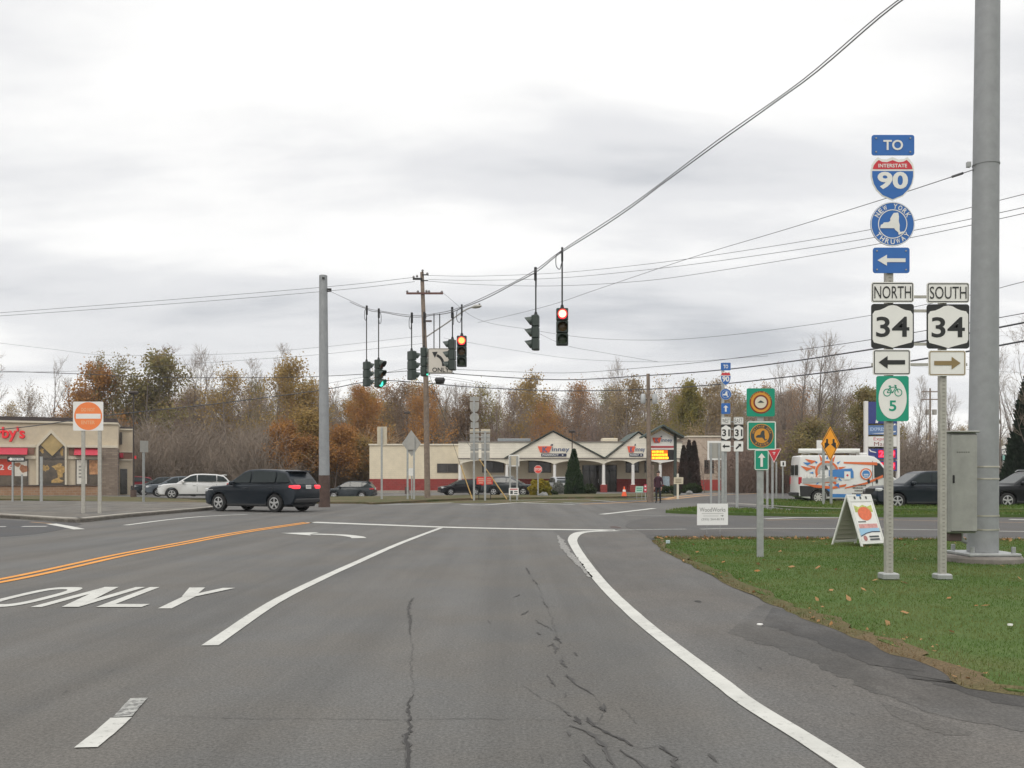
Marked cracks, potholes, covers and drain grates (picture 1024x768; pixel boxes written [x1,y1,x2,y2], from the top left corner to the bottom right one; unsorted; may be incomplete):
crack [392,598,415,768]
crack [514,568,680,768]
